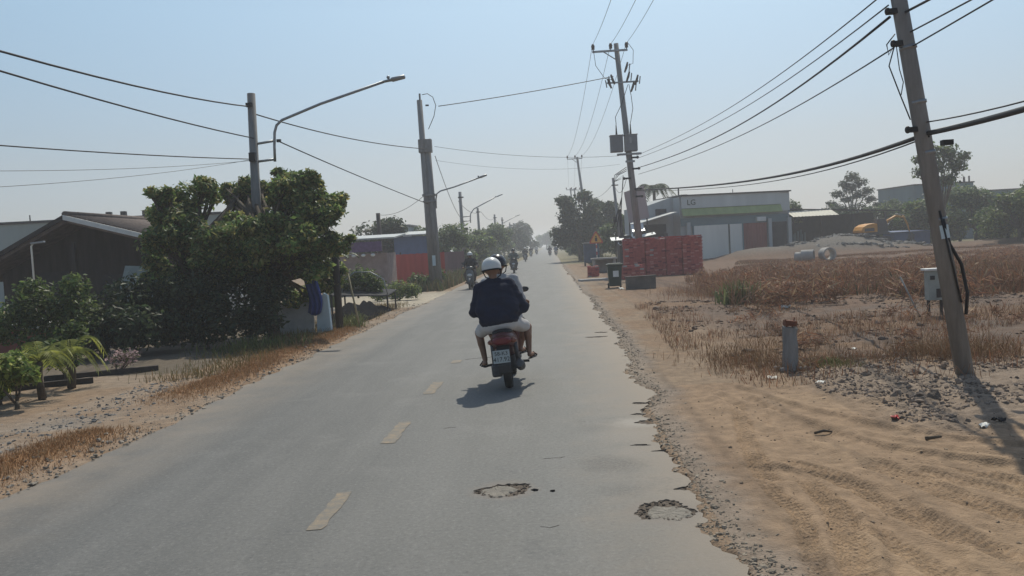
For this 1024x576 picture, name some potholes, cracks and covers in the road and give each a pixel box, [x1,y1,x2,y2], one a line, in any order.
pothole [634,499,698,521]
pothole [473,483,532,498]
